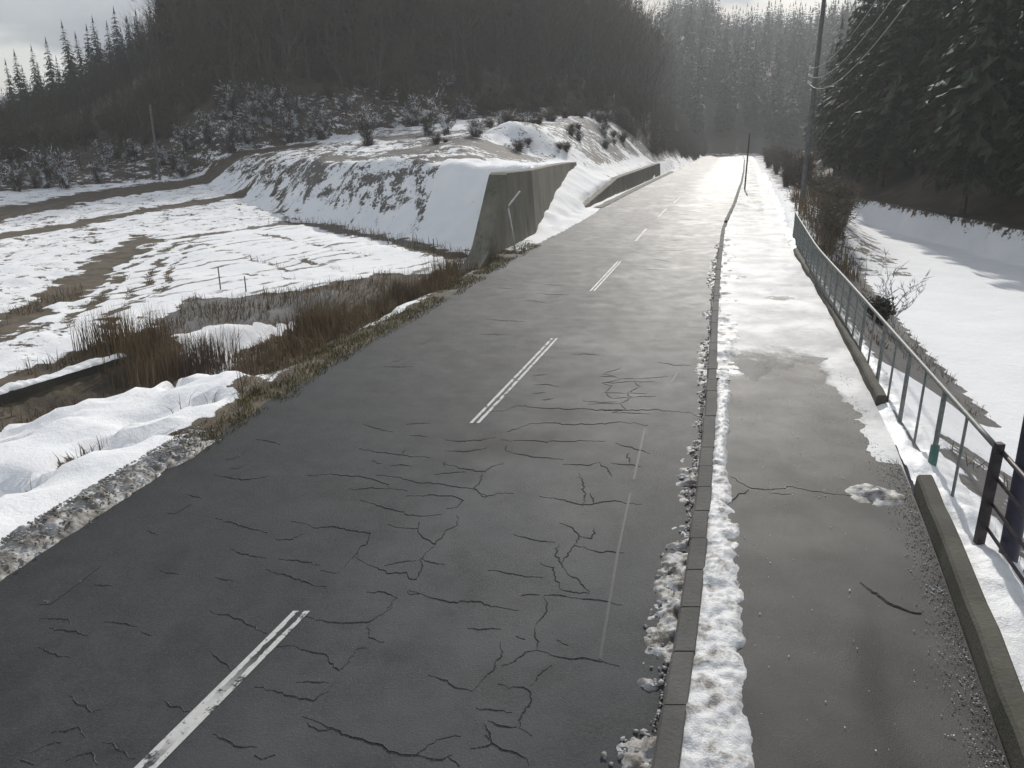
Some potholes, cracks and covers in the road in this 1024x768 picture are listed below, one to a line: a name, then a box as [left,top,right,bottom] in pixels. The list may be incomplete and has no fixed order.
crack [727,477,852,505]
crack [163,697,189,712]
crack [20,696,135,766]
crack [38,618,89,658]
crack [107,622,151,636]
crack [210,362,702,767]
crack [860,582,922,614]
